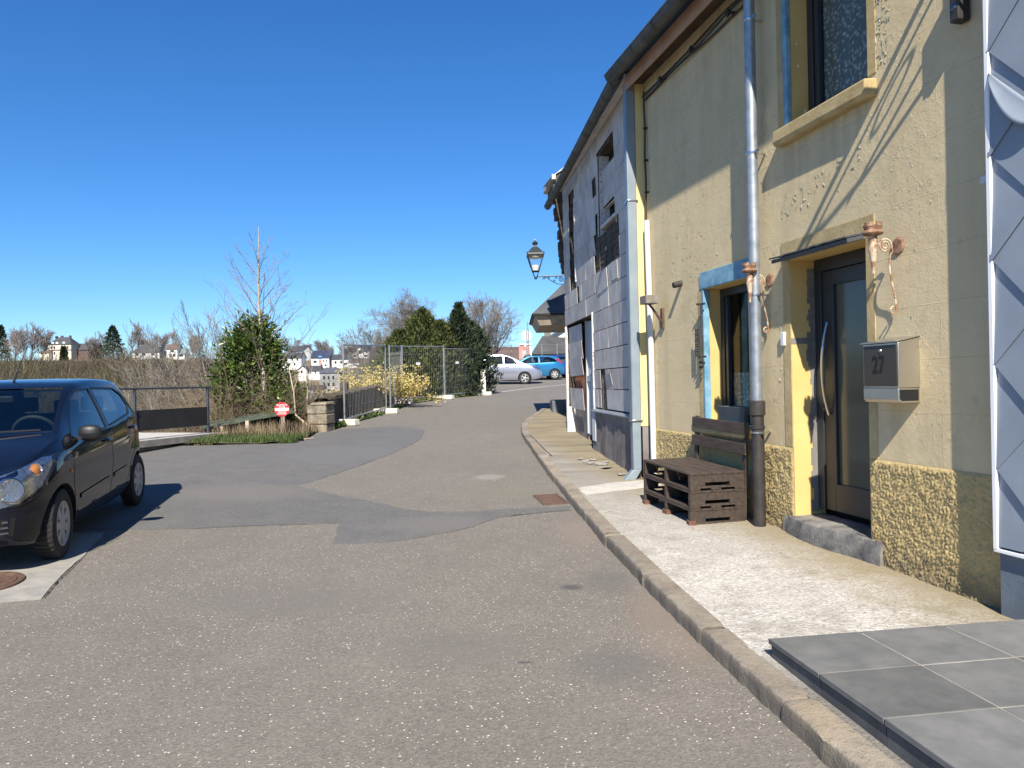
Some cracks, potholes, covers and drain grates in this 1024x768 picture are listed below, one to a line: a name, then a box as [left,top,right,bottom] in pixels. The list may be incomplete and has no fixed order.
manhole cover [0,571,26,590]
